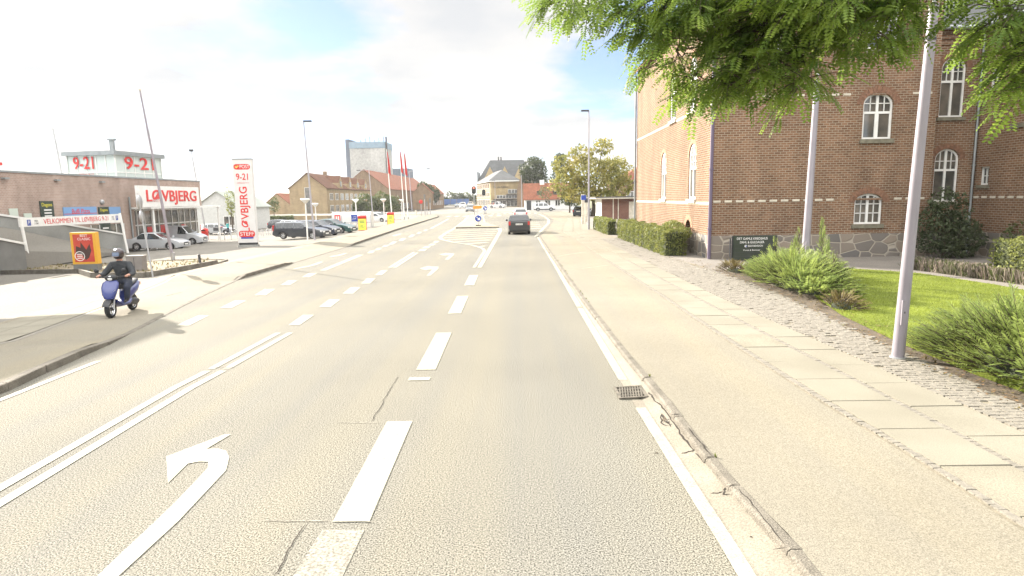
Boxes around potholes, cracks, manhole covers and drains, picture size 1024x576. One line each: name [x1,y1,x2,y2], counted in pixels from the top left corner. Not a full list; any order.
crack [274,523,306,575]
drain grate [613,385,648,399]
crack [648,392,704,463]
